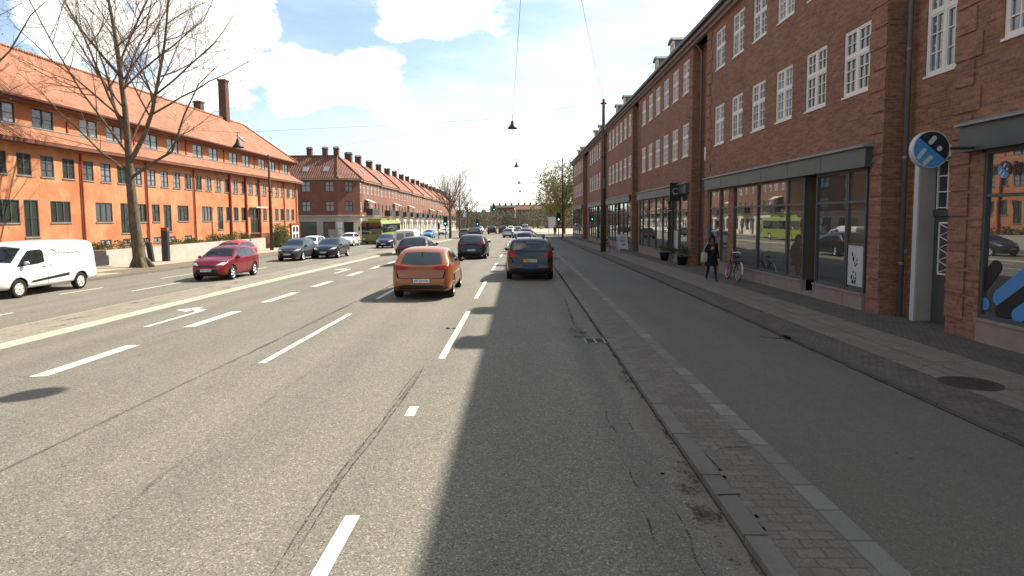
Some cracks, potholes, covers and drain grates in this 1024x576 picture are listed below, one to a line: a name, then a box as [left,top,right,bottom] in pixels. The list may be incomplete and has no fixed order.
manhole cover [937,376,1005,391]
